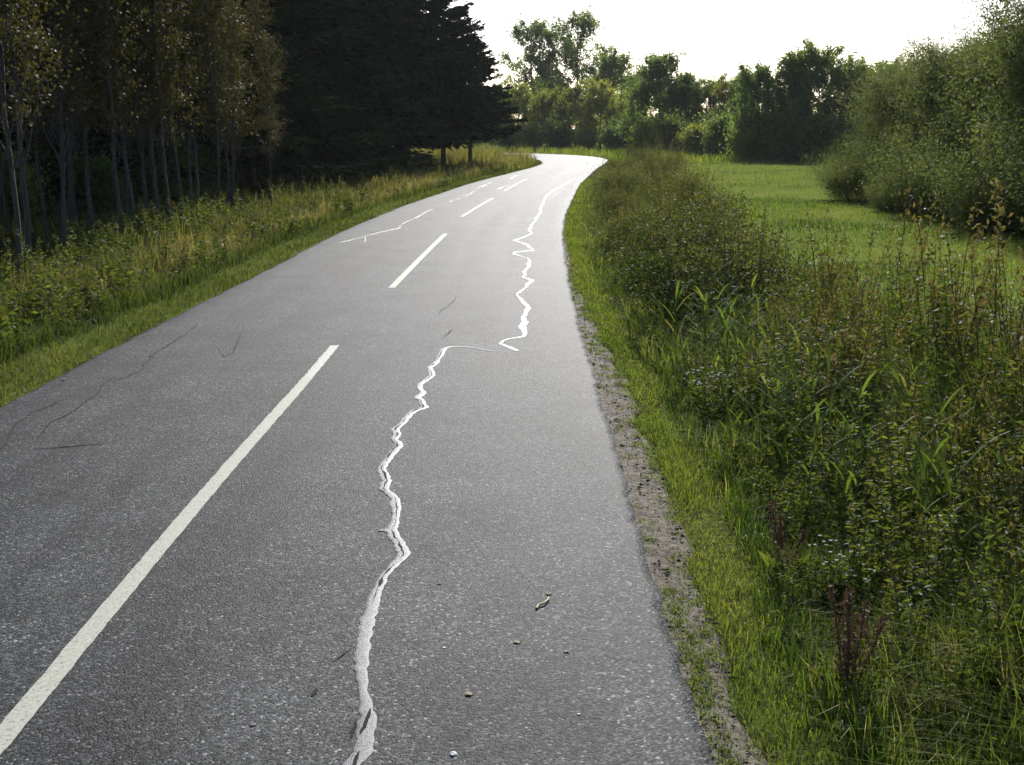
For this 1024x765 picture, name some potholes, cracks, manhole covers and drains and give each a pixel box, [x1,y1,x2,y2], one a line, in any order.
crack [0,326,195,449]
